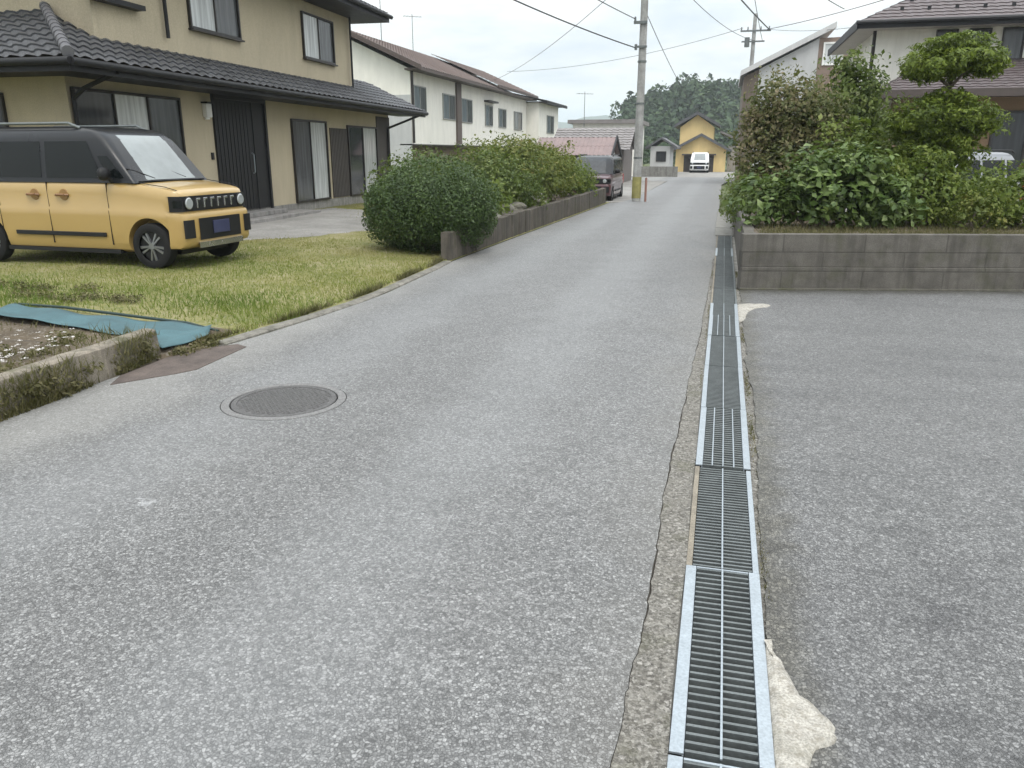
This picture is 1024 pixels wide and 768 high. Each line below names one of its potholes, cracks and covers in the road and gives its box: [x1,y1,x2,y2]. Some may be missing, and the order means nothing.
drain grate [710,303,738,318]
drain grate [713,264,735,276]
drain grate [712,275,736,289]
drain grate [696,407,751,472]
drain grate [686,466,759,575]
drain grate [714,256,734,265]
manhole cover [220,383,346,421]
drain grate [711,288,737,306]
drain grate [715,248,733,256]
drain grate [705,335,742,368]
drain grate [667,754,739,768]
drain grate [701,365,746,411]
